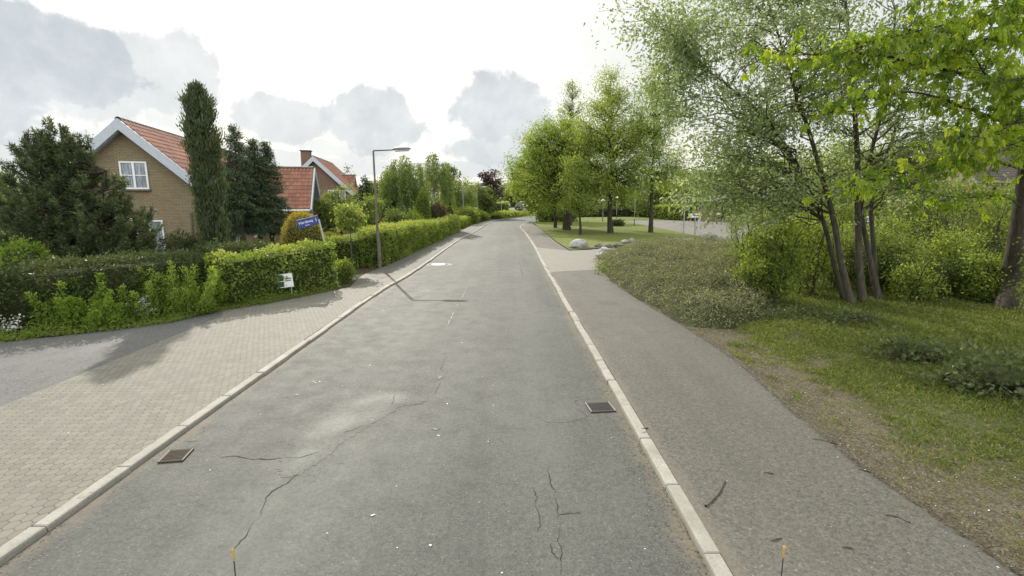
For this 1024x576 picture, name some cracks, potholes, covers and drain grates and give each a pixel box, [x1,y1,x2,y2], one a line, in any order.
drain grate [585,401,616,413]
crack [225,454,311,547]
drain grate [157,448,194,463]
crack [534,469,580,570]
